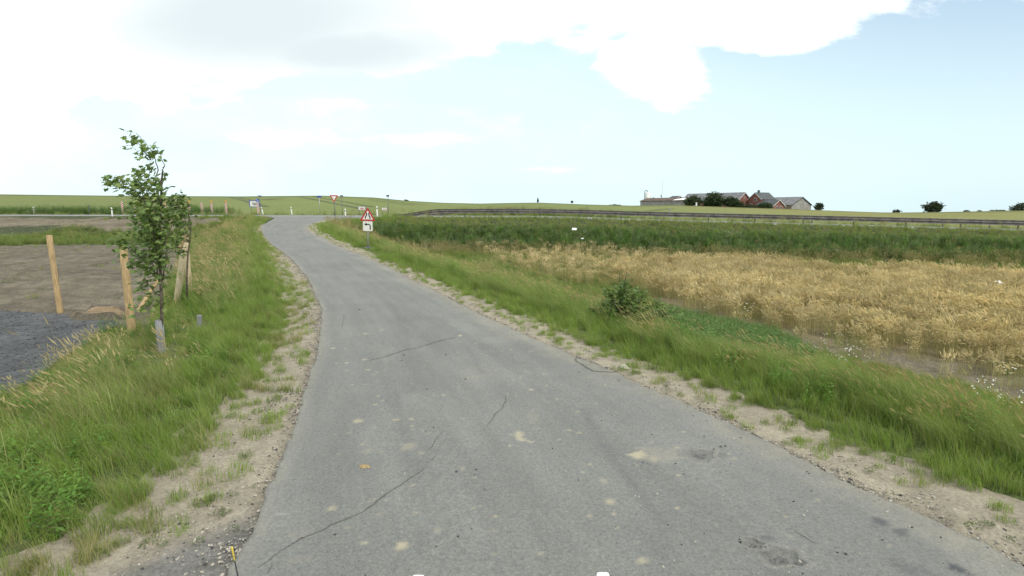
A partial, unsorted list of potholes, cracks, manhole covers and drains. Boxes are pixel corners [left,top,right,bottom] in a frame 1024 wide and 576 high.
crack [259,431,443,573]
pothole [740,536,769,552]
pothole [750,543,817,570]
